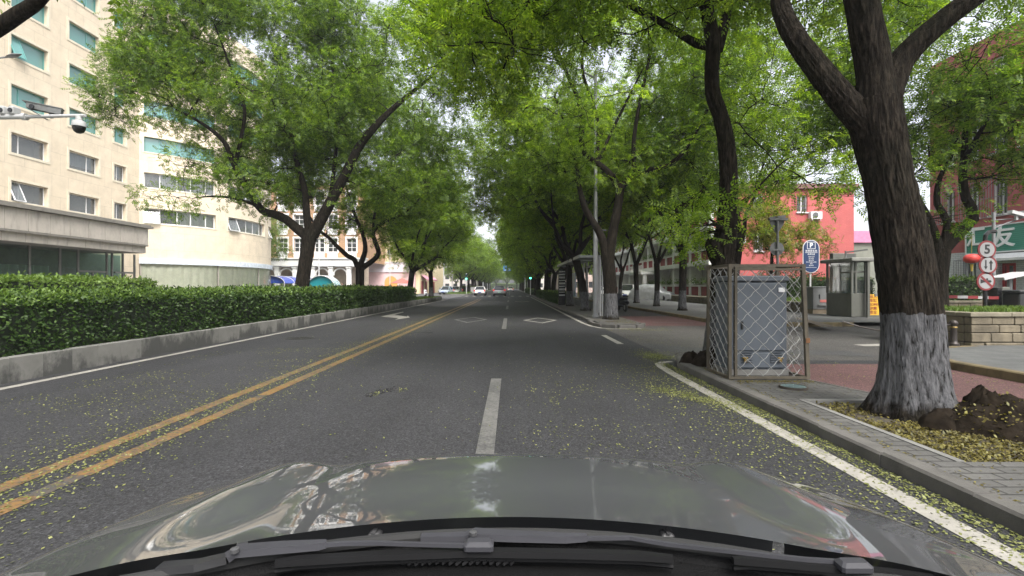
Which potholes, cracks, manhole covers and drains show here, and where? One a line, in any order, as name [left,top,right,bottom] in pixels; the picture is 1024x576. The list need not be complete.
pothole [365,386,396,397]
manhole cover [779,383,809,391]
